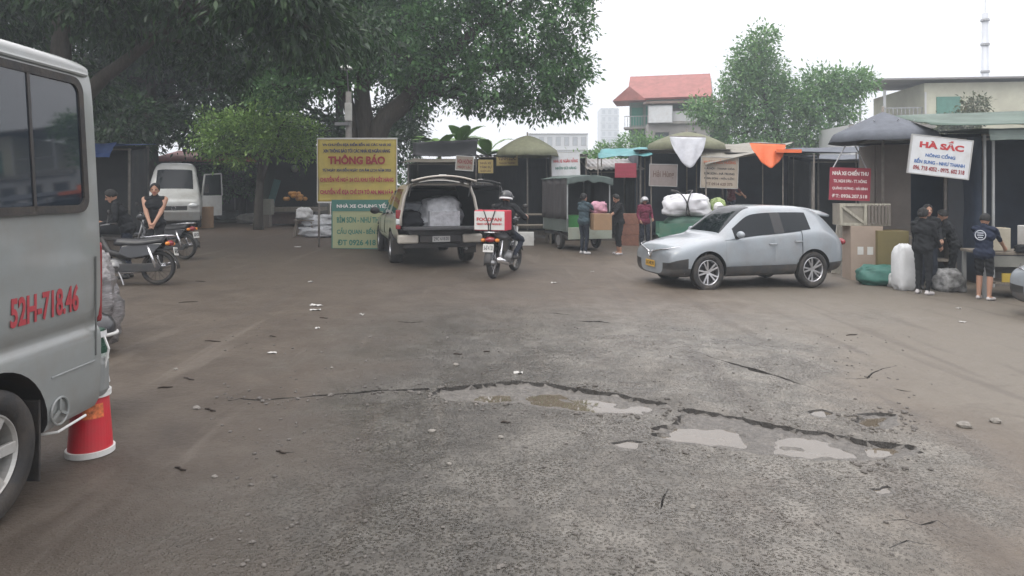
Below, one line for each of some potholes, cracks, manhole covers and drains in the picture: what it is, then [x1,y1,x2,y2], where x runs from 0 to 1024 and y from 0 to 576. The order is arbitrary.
pothole [651,408,924,461]
pothole [432,381,672,415]
pothole [611,440,644,452]
crack [228,388,430,401]
crack [696,351,825,394]
